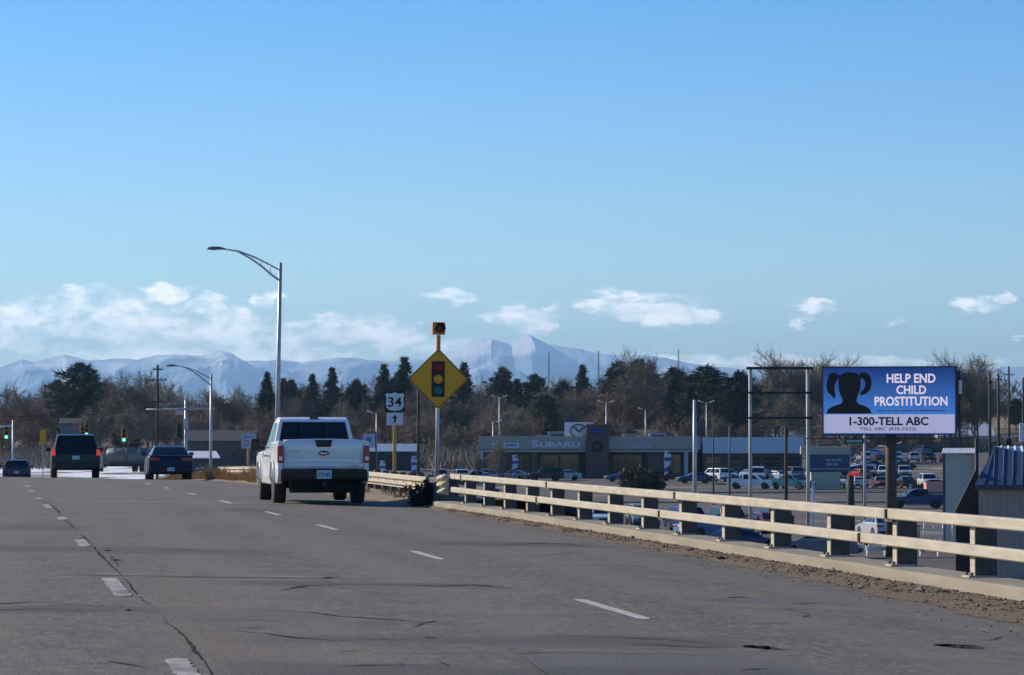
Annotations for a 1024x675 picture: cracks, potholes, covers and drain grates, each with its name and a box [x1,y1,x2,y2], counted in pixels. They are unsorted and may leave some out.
crack [168,608,448,666]
